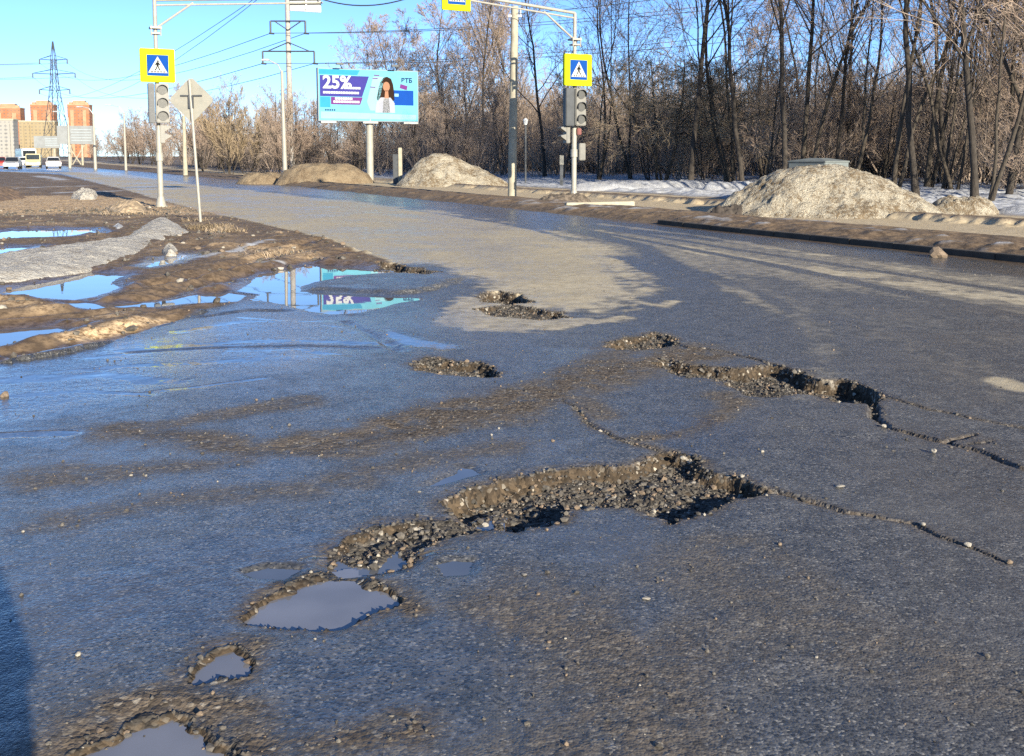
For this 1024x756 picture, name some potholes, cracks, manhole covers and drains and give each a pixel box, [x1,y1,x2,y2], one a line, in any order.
pothole [474,305,569,320]
pothole [649,358,884,407]
pothole [474,291,536,305]
pothole [437,450,769,533]
crack [561,399,666,453]
pothole [184,643,262,687]
pothole [602,332,680,350]
crack [765,487,1007,564]
pothole [239,570,410,633]
crack [867,394,1024,470]
pothole [61,709,253,756]
